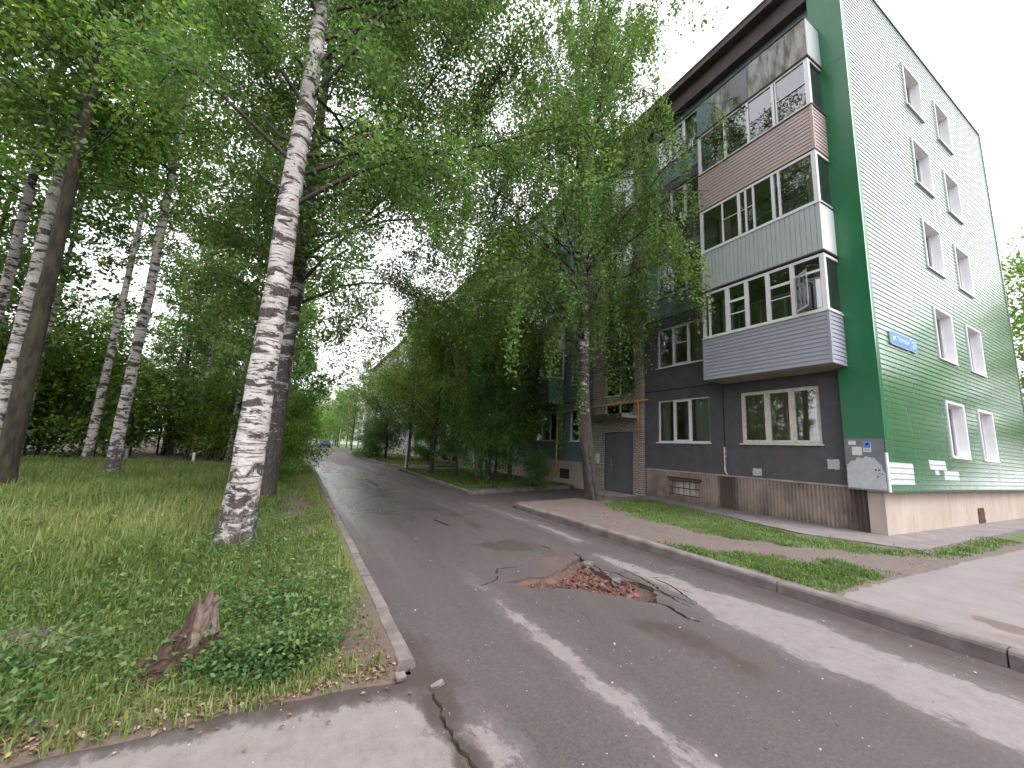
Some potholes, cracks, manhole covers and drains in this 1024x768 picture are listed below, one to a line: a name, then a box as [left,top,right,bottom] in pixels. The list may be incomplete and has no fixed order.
crack [574,553,699,622]
crack [481,566,524,586]
pothole [508,557,658,603]
